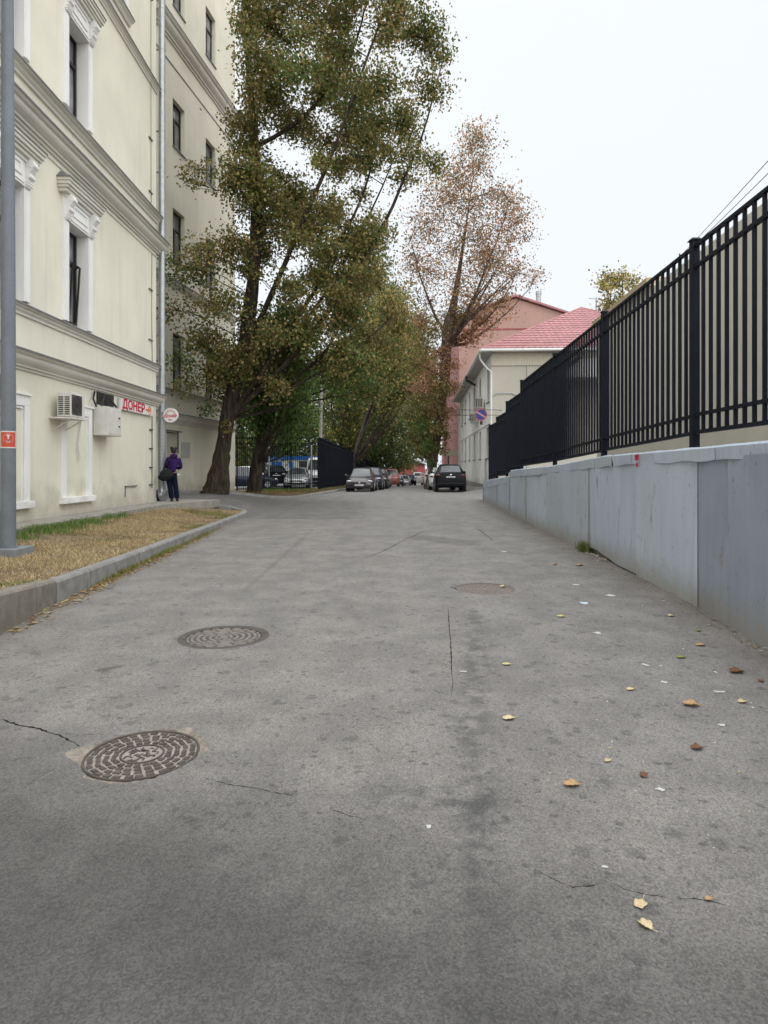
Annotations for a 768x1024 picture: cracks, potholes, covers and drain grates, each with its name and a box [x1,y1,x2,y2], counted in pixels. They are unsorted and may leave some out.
manhole cover [65,727,208,784]
manhole cover [177,626,269,649]
crack [535,869,726,906]
crack [3,719,91,747]
crack [203,777,369,821]
manhole cover [451,583,515,594]
